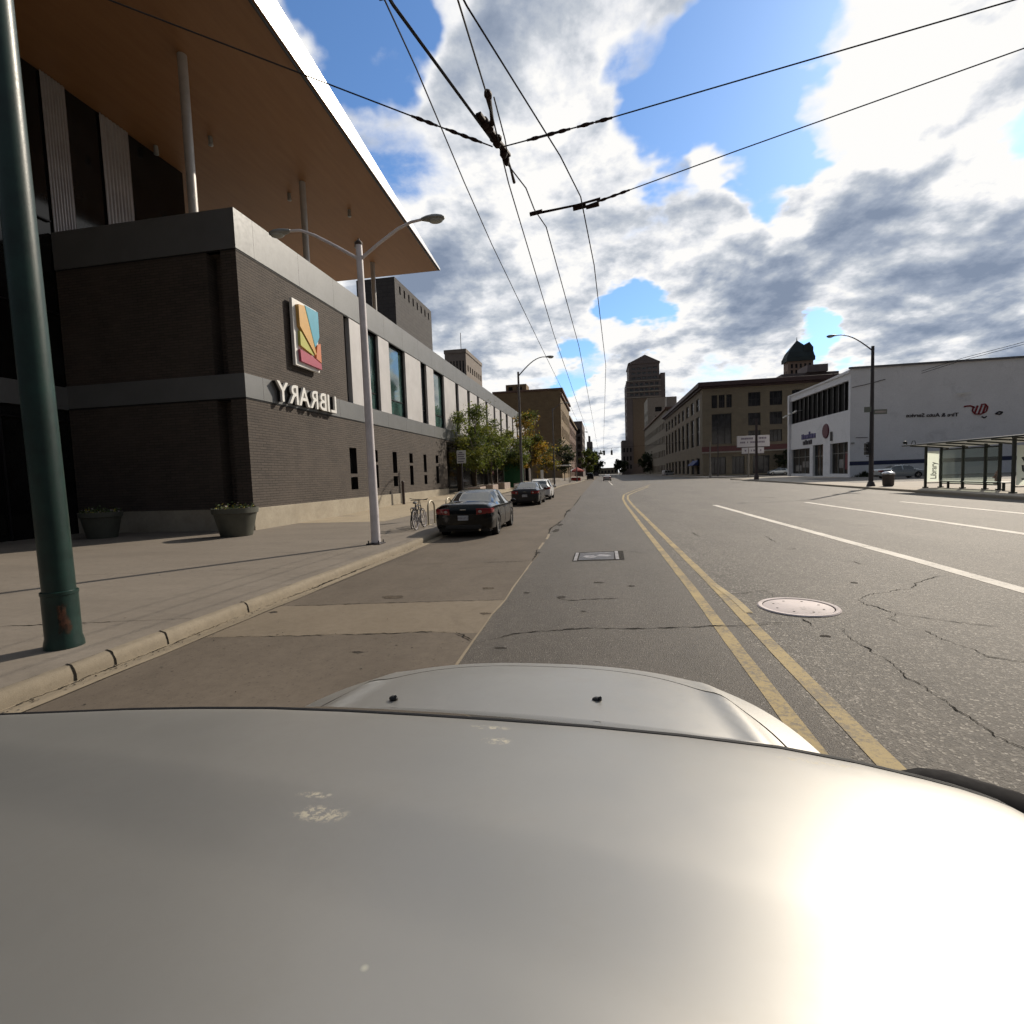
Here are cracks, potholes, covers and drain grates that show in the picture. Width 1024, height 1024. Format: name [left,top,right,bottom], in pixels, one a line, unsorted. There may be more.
crack [859,576,1015,661]
crack [490,624,754,640]
utility cover [572,551,625,561]
manhole cover [757,597,842,617]
crack [842,627,1024,748]
